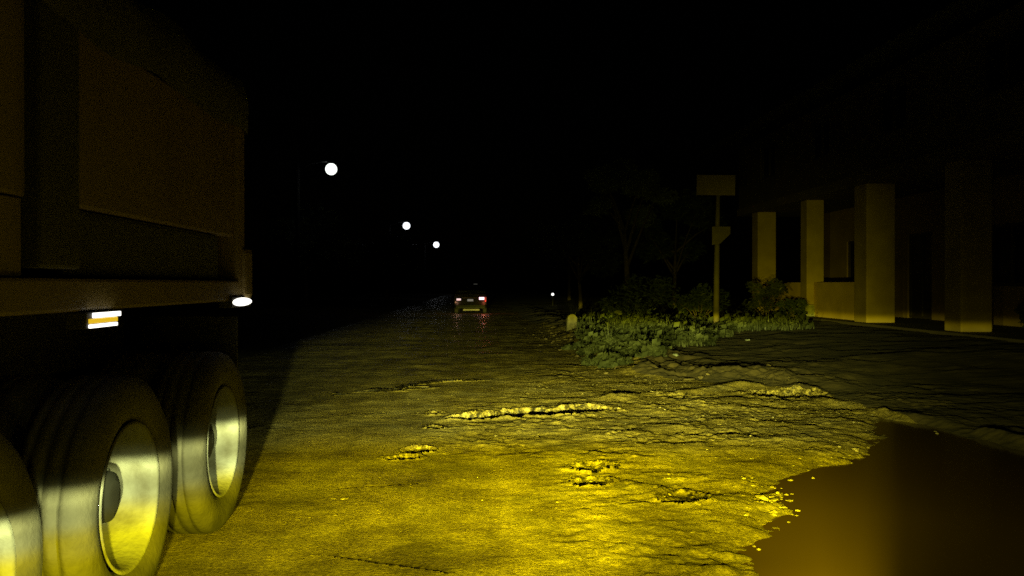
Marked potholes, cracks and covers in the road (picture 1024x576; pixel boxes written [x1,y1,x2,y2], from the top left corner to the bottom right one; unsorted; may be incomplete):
crack [327,554,455,574]
pothole [442,403,625,421]
crack [331,378,496,396]
pothole [653,486,714,504]
crack [329,482,418,490]
pothole [738,383,835,399]
pothole [566,459,621,487]
pothole [379,444,439,461]
